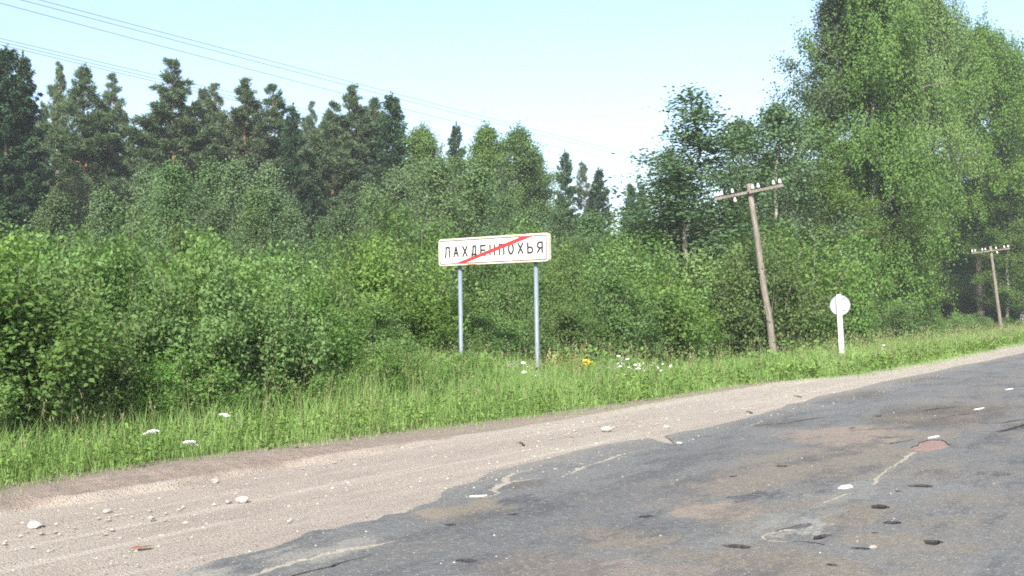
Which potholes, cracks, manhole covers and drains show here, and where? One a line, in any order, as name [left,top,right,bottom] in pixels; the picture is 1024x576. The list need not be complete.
crack [473,446,660,498]
crack [761,524,825,545]
crack [823,406,1024,503]
